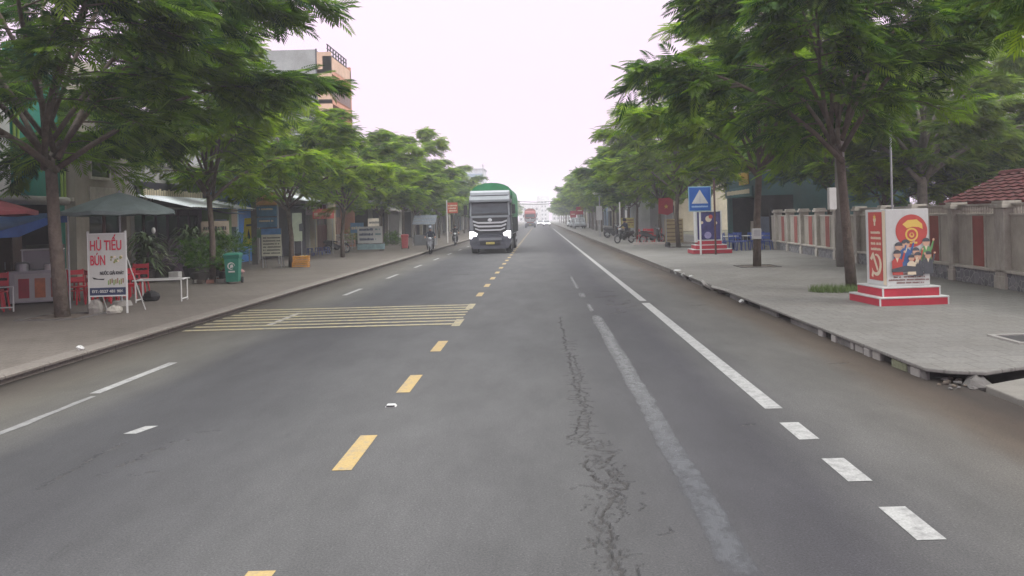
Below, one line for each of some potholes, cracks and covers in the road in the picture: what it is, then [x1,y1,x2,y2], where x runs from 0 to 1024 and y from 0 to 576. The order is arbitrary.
manhole cover [987,333,1024,344]
crack [544,289,720,576]
